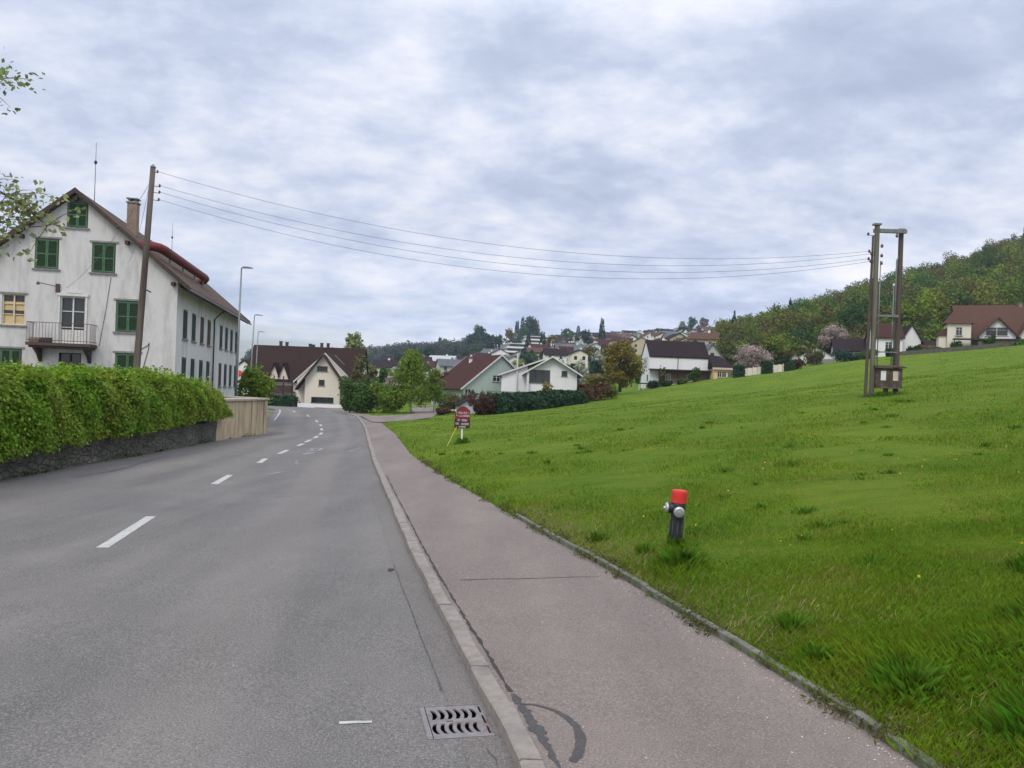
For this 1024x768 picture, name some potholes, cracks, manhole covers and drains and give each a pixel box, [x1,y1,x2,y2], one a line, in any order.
drain grate [418,704,495,740]
